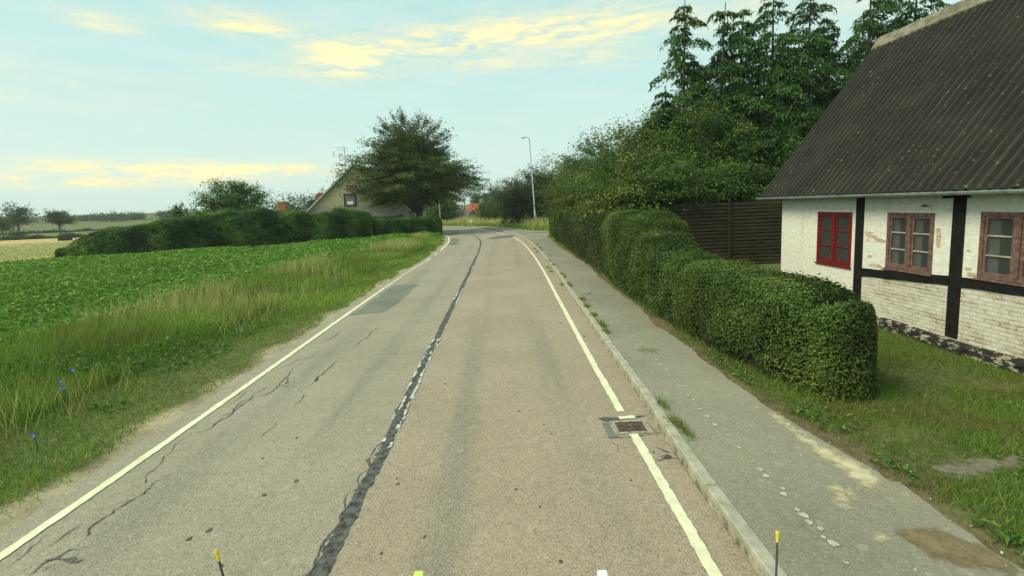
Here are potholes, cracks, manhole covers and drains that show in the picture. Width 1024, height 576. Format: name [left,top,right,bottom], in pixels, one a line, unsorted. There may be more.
crack [173,326,382,446]
crack [4,445,175,575]
